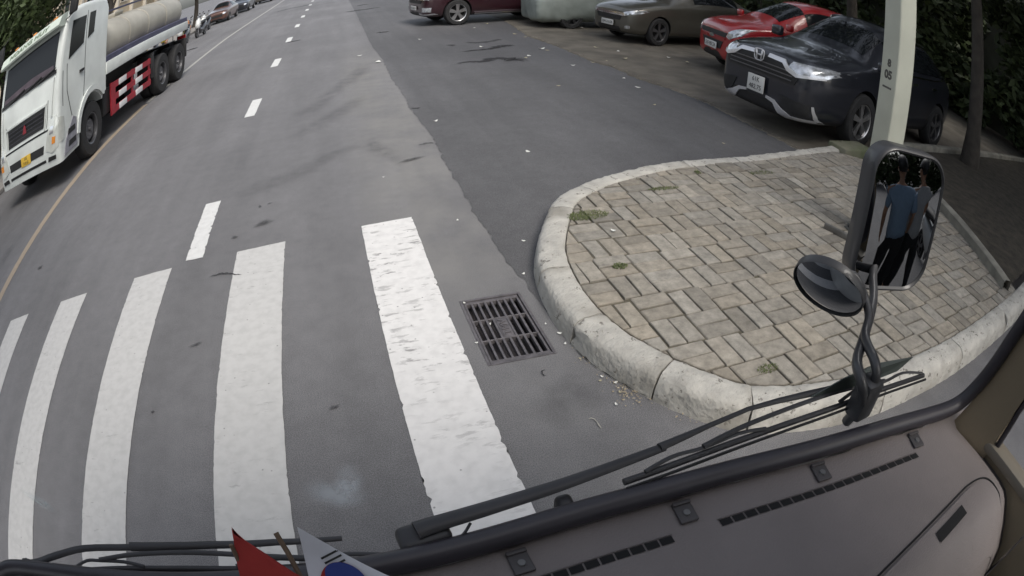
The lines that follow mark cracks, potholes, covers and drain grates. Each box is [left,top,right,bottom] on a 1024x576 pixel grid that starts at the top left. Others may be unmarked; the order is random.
drain grate [459,292,557,366]
crack [461,41,520,63]
